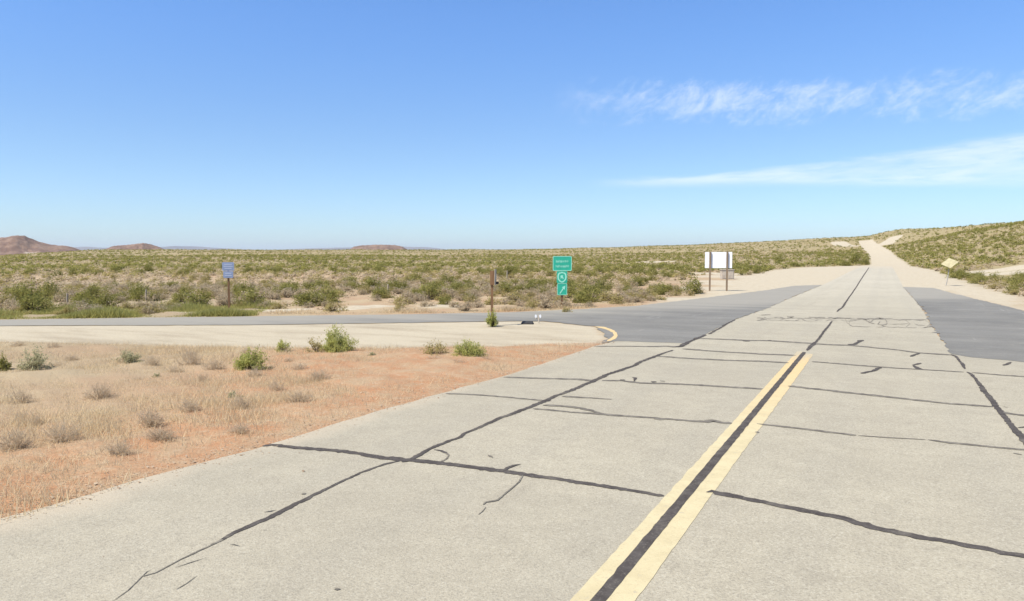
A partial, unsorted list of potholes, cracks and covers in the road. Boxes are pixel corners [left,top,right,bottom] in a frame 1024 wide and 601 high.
crack [757,314,933,328]
